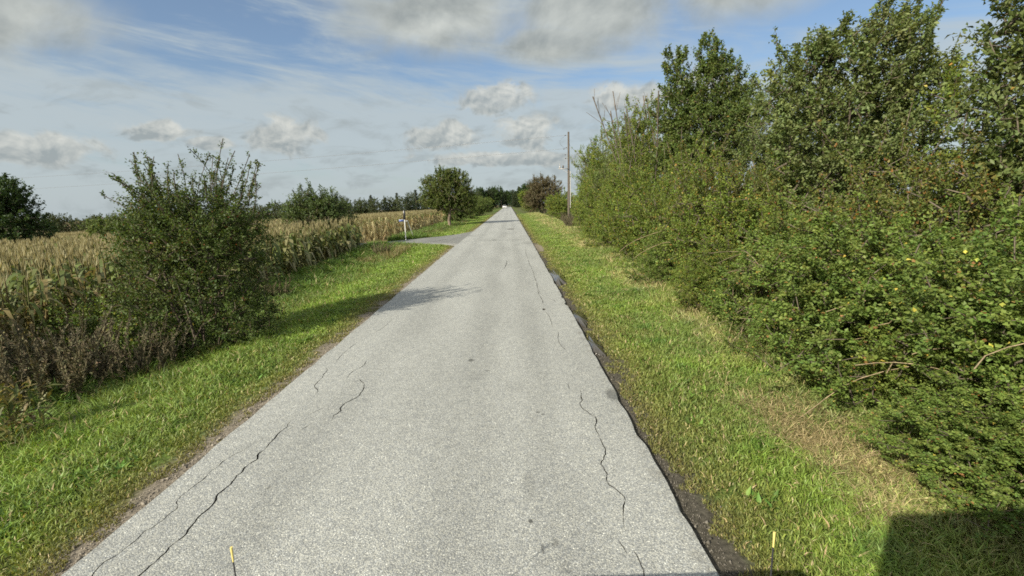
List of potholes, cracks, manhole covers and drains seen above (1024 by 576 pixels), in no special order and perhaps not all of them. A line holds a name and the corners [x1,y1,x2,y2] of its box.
crack [568,385,645,576]
crack [92,342,366,576]
